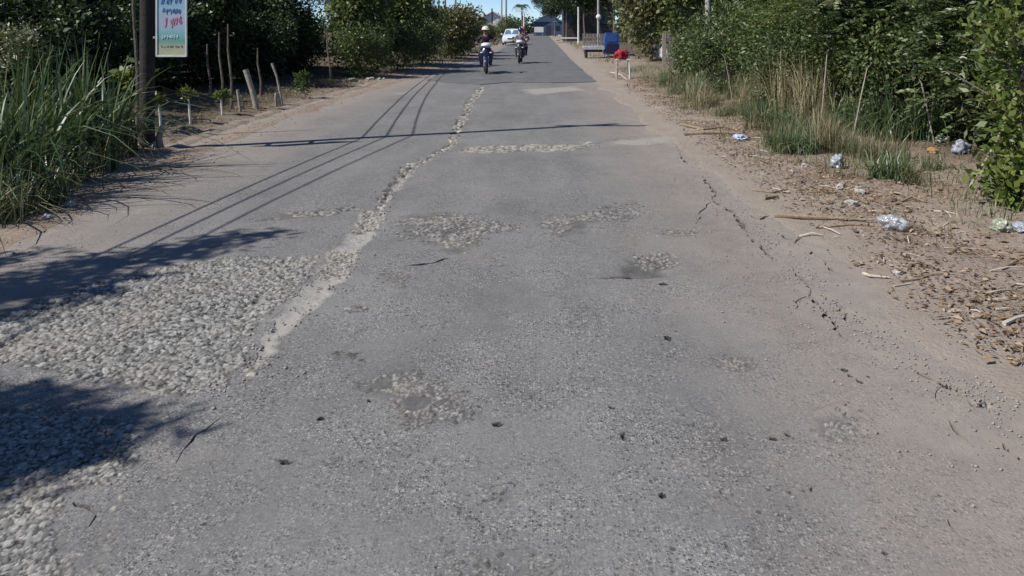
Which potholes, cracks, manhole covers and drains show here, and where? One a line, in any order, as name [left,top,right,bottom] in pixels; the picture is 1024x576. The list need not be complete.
pothole [580,250,682,281]
crack [795,275,846,337]
crack [699,181,831,271]
